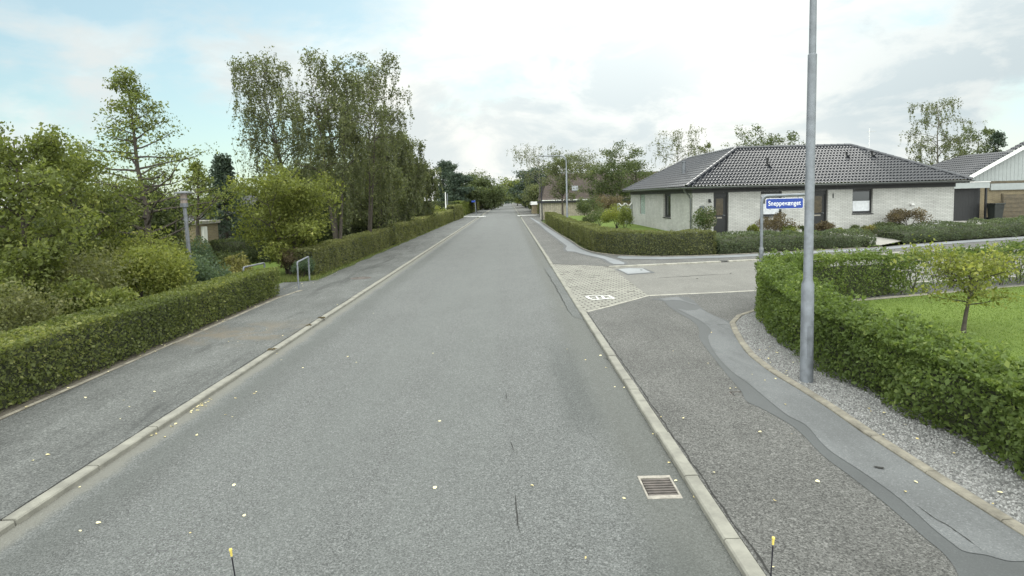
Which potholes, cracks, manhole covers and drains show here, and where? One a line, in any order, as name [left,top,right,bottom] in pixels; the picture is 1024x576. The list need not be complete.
drain grate [637,475,683,499]
